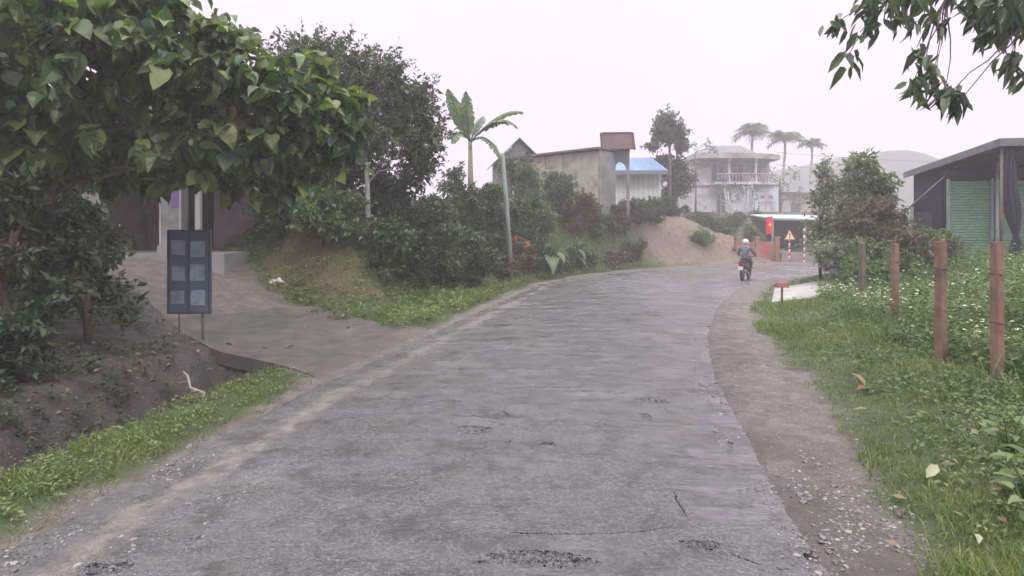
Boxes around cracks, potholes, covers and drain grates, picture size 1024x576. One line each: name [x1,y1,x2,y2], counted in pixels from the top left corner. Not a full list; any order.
crack [511,492,692,535]
pothole [473,550,603,569]
pothole [454,425,494,434]
pothole [75,562,135,576]
crack [729,552,761,565]
pothole [679,540,723,550]
